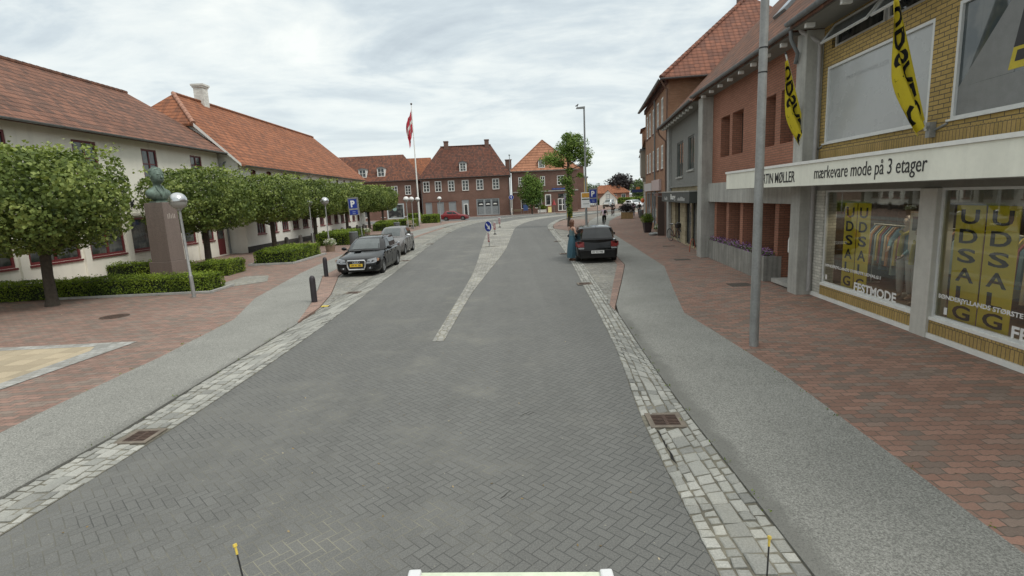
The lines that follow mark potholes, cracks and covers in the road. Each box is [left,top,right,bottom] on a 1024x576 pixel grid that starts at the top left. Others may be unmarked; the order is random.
drain grate [644,412,688,429]
drain grate [114,428,167,445]
